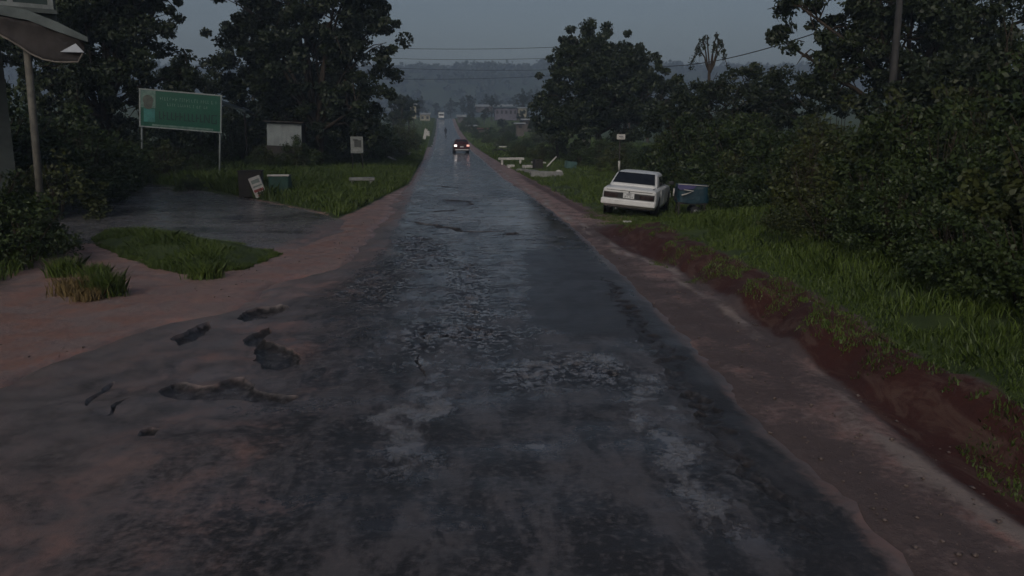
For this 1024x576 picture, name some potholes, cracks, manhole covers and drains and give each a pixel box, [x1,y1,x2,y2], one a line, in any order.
pothole [170,320,211,346]
pothole [243,326,302,371]
pothole [138,426,160,436]
pothole [237,304,289,322]
pothole [159,377,299,404]
crack [334,210,822,539]
